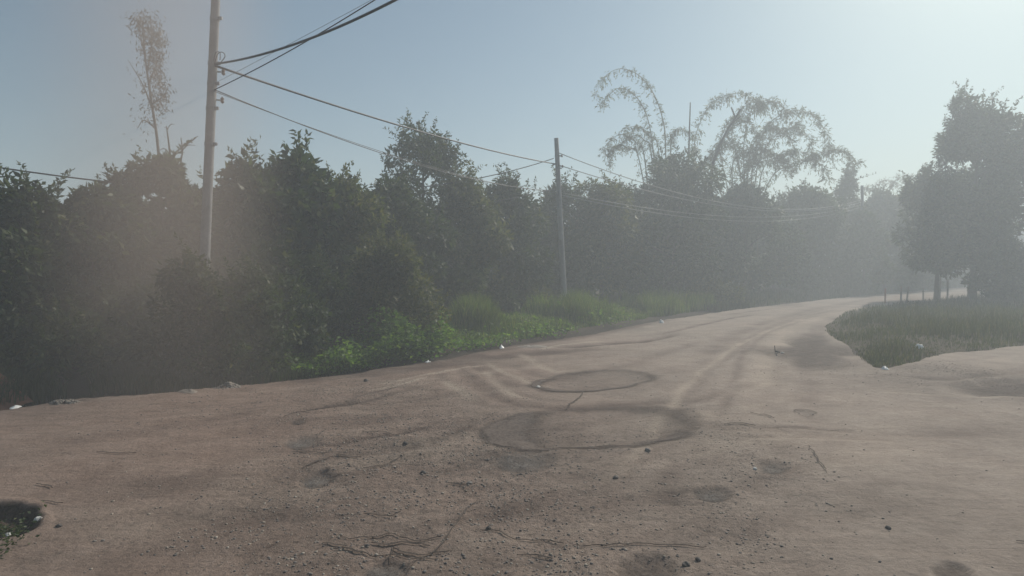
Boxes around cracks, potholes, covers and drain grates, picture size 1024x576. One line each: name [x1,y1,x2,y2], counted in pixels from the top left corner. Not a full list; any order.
crack [322,482,479,569]
pothole [700,493,723,502]
pothole [306,477,327,487]
pothole [0,503,41,538]
